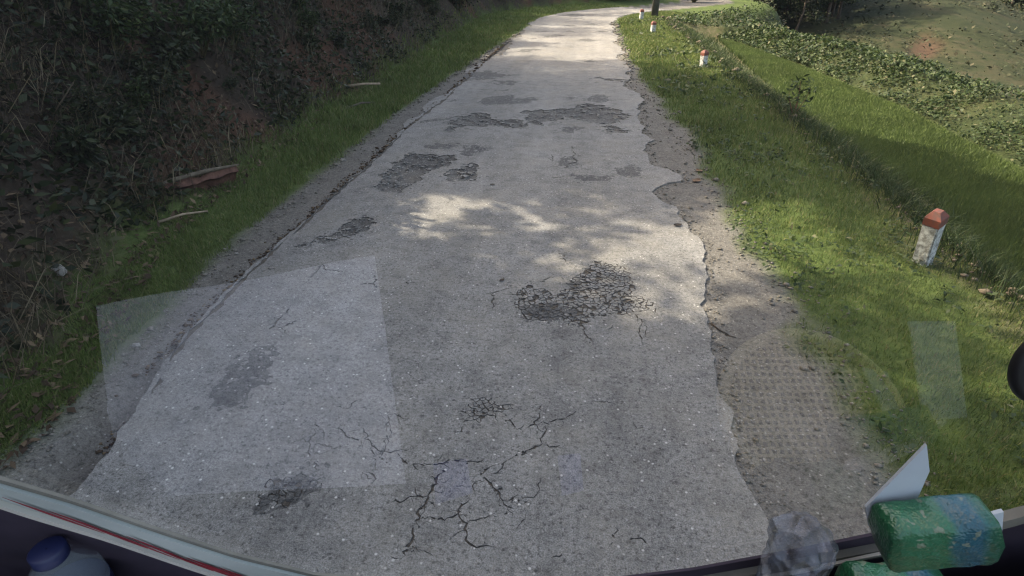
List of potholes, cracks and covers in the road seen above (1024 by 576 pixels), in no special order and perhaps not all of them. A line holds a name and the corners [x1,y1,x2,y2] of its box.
pothole [443,163,479,181]
pothole [601,125,628,134]
pothole [295,217,377,248]
crack [151,40,512,394]
crack [487,251,666,345]
pothole [520,103,639,125]
pothole [444,113,529,132]
crack [257,397,576,560]
pothole [373,152,457,193]
